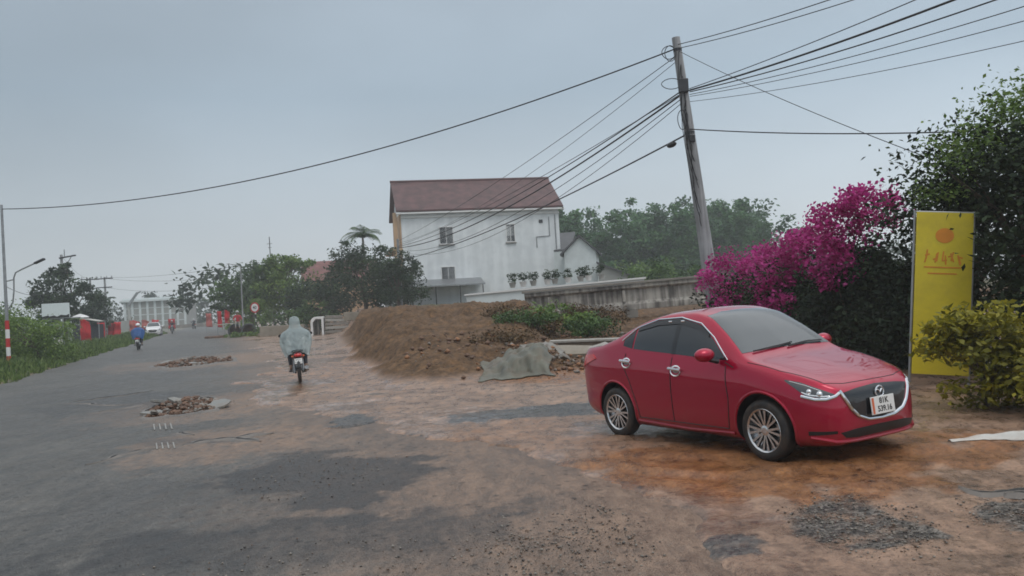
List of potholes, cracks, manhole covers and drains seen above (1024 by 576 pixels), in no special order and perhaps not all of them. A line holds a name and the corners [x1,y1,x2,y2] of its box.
pothole [149,355,238,369]
pothole [139,396,231,420]
crack [85,432,274,465]
